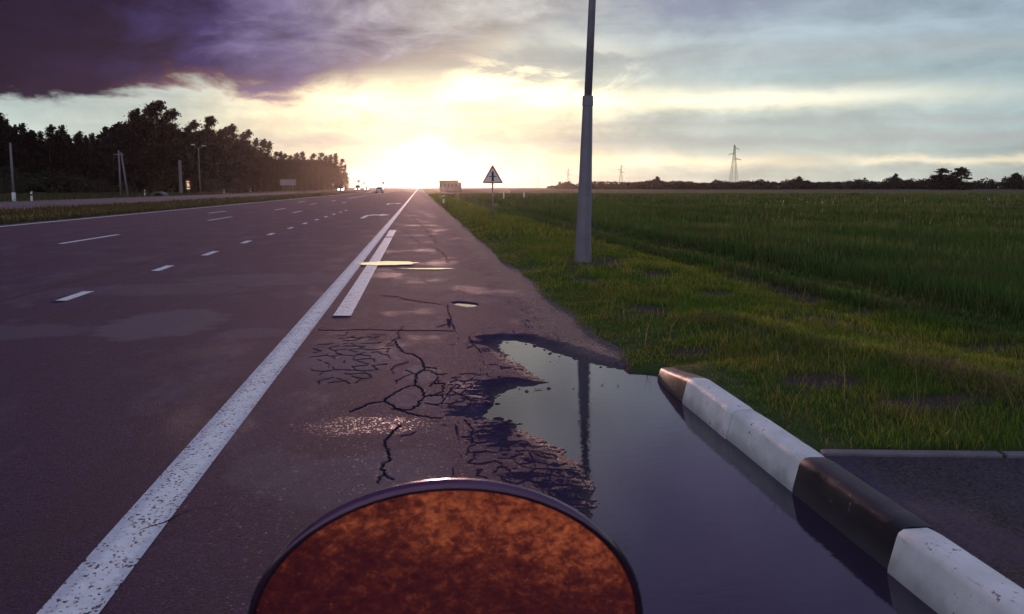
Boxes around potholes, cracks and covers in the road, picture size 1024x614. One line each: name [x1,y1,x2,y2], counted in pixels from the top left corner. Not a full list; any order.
pothole [476,339,658,518]
crack [309,297,584,512]
